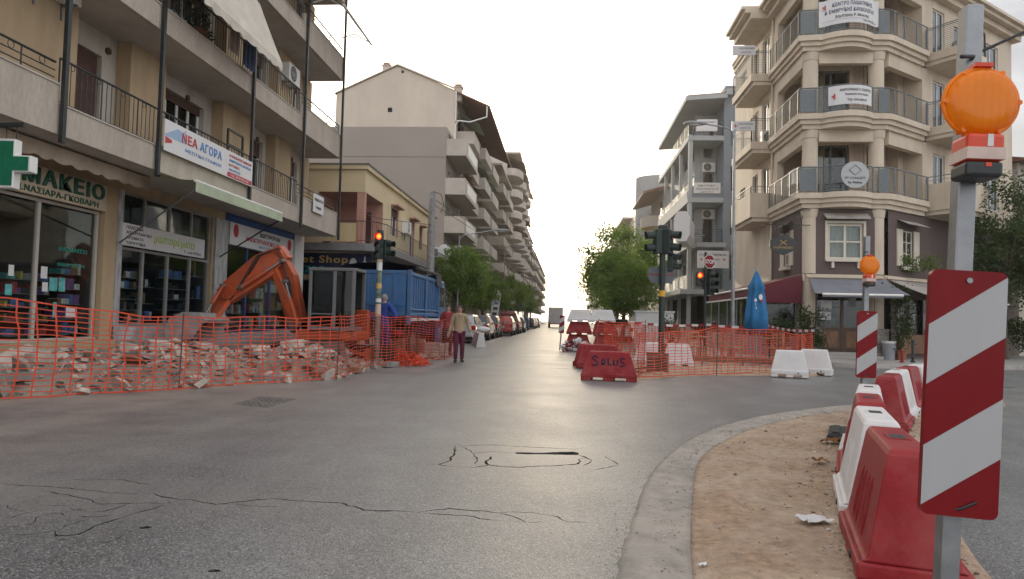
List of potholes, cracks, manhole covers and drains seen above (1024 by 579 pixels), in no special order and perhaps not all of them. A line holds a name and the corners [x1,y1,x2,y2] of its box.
crack [435,445,618,470]
crack [0,479,589,543]
